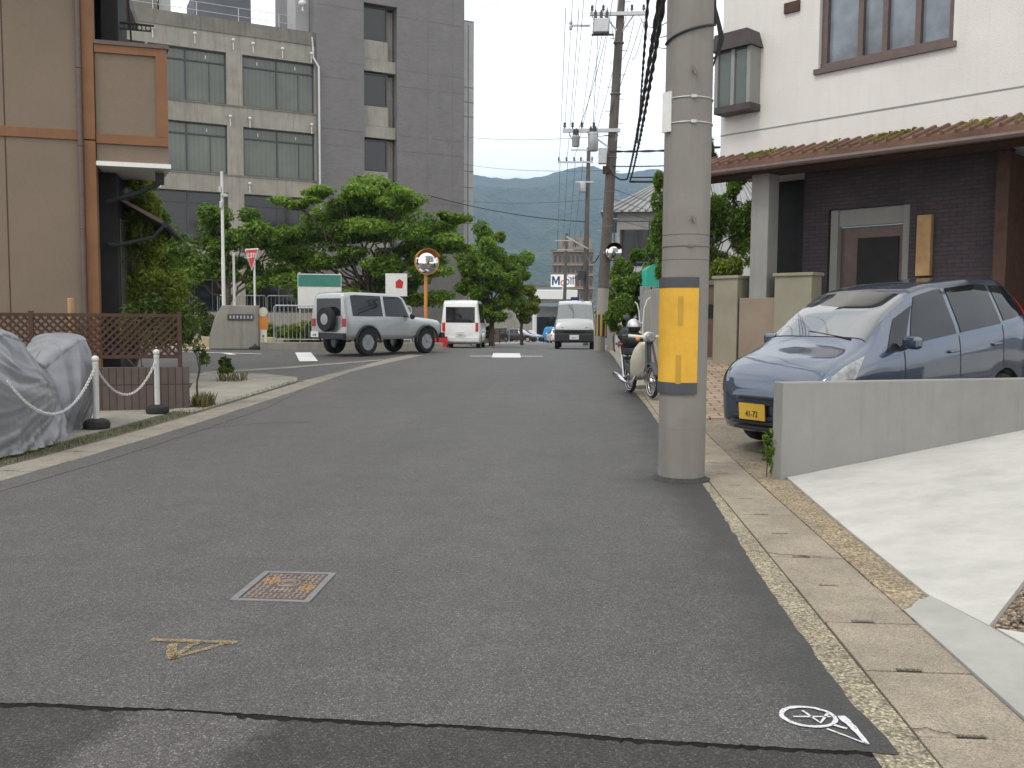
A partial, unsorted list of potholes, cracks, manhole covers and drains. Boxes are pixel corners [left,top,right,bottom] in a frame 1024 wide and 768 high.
manhole cover [229,571,337,603]
